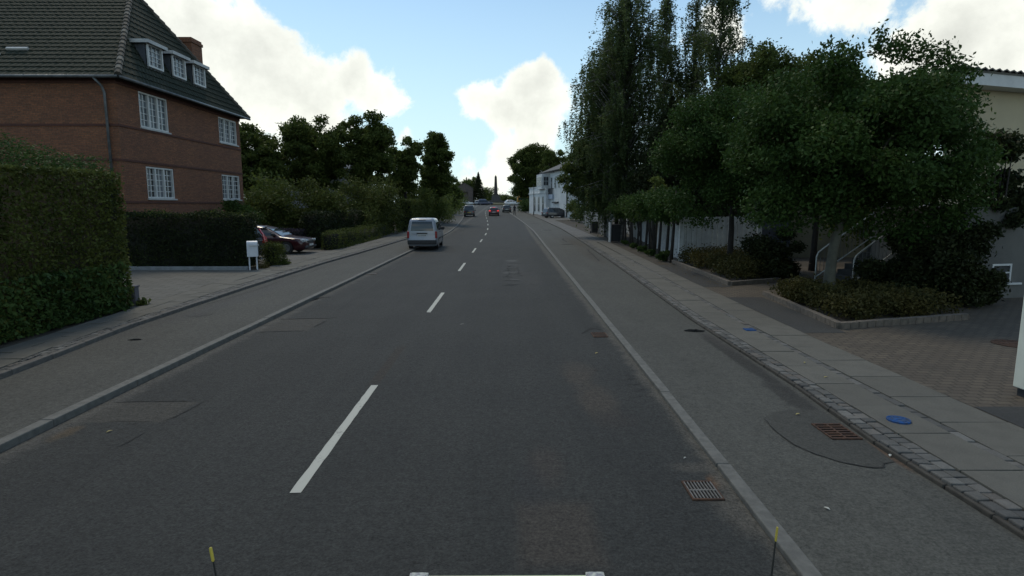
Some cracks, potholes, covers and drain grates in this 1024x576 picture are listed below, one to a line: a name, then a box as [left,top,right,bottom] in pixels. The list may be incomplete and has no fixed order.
drain grate [811,423,863,440]
drain grate [681,480,725,501]
manhole cover [886,415,911,425]
manhole cover [990,339,1018,348]
